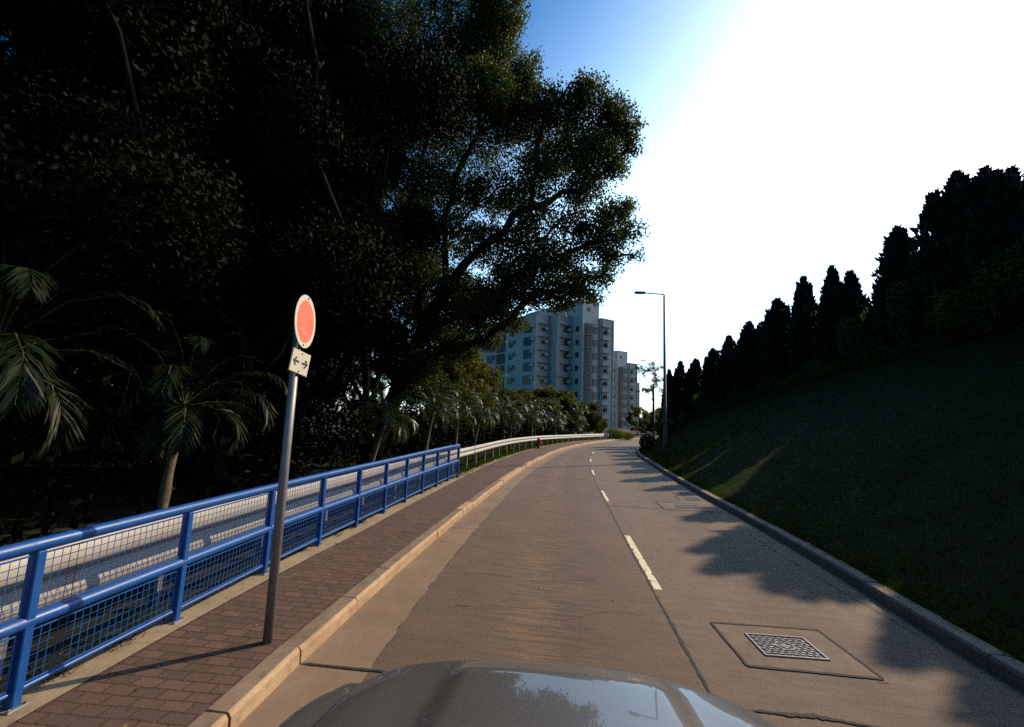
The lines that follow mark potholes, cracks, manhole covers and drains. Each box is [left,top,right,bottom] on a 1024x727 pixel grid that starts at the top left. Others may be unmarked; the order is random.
manhole cover [710,621,885,680]
manhole cover [656,502,712,512]
